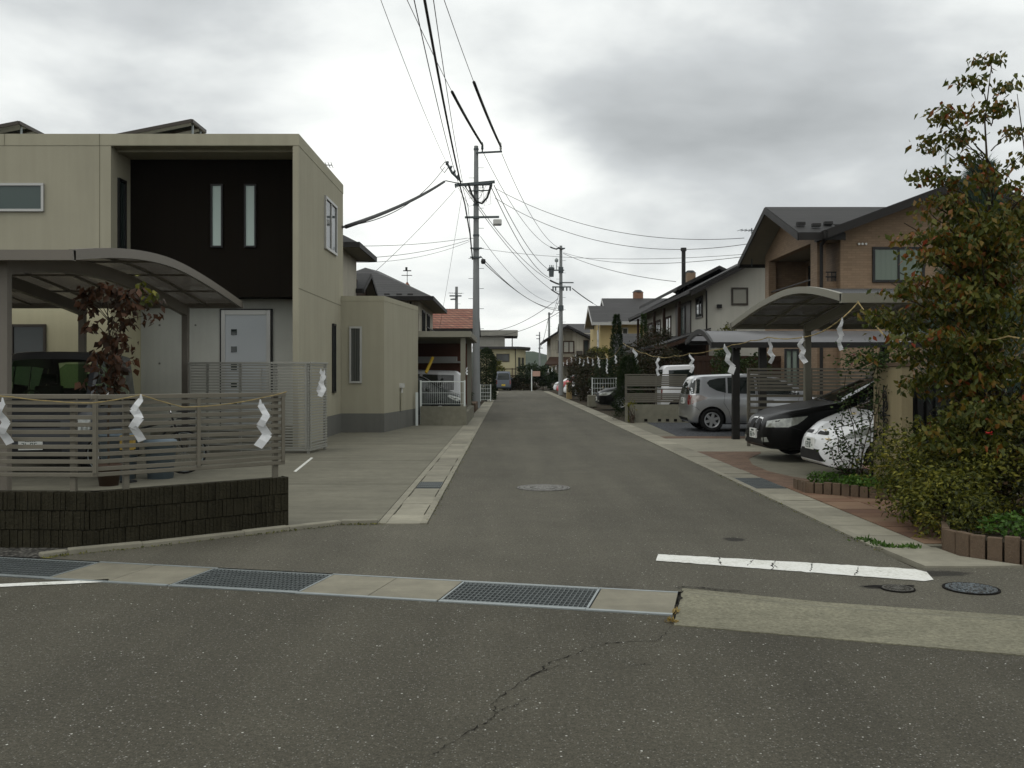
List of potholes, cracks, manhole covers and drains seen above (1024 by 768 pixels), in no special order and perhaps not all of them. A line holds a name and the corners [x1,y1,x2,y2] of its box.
manhole cover [880,584,916,593]
manhole cover [942,582,1001,595]
drain grate [173,568,332,592]
drain grate [440,581,600,608]
drain grate [735,478,786,489]
crack [433,626,671,754]
